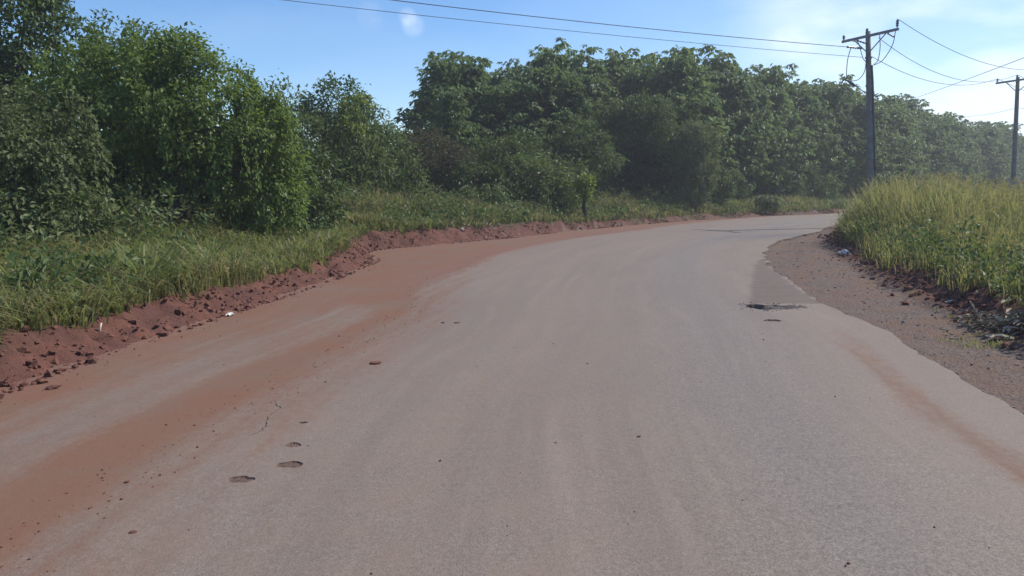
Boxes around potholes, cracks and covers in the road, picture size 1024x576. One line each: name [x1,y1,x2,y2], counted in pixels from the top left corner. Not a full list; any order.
pothole [735,302,811,311]
